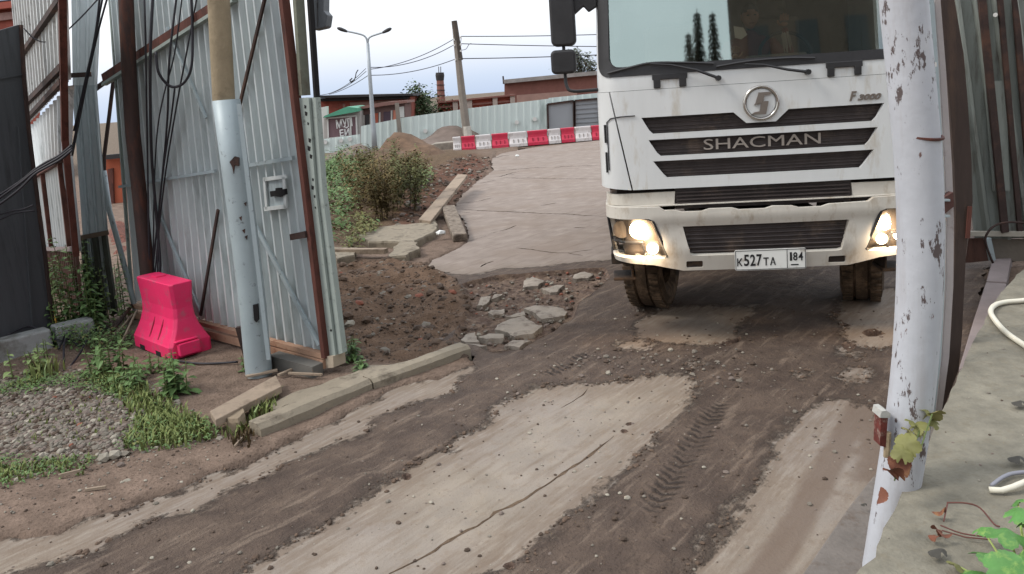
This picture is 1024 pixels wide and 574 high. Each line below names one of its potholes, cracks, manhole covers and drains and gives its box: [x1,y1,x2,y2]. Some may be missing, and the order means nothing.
pothole [862,328,885,337]
crack [389,440,609,574]
pothole [453,267,610,352]
